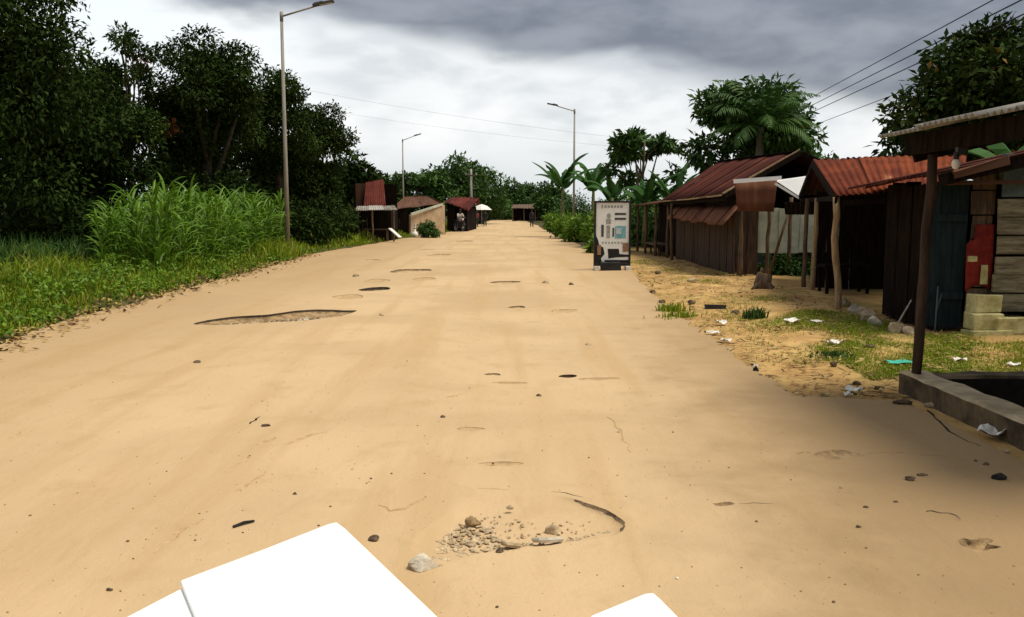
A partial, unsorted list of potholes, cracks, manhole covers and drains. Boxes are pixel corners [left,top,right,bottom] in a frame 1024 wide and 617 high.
pothole [956,537,1001,553]
pothole [410,493,625,559]
pothole [194,309,357,325]
pothole [813,450,864,460]
crack [379,497,426,512]
crack [608,417,631,452]
